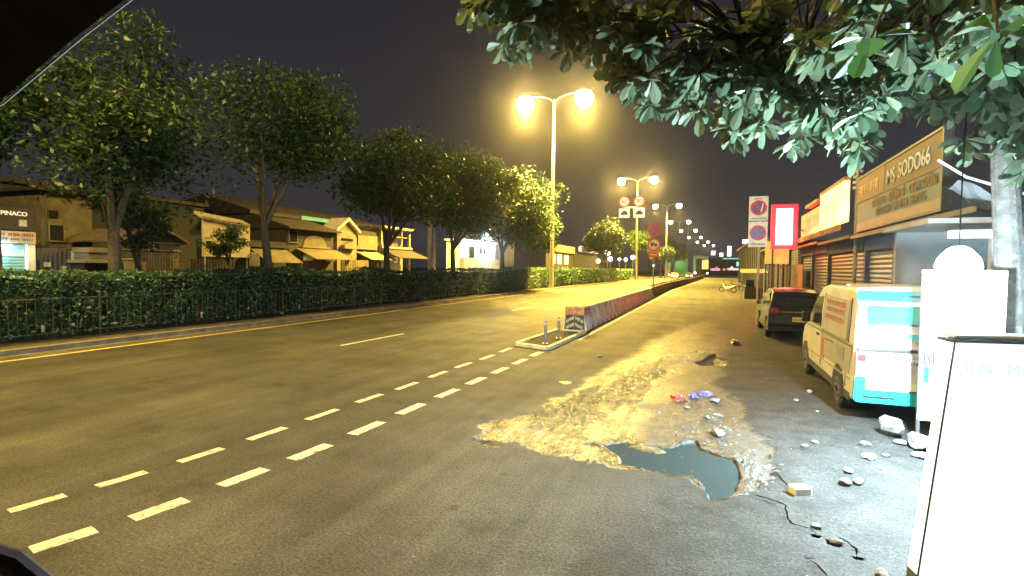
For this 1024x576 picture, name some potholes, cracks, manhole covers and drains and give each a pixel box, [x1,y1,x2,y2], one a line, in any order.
pothole [694,353,732,367]
crack [747,471,867,576]
pothole [598,439,746,501]
